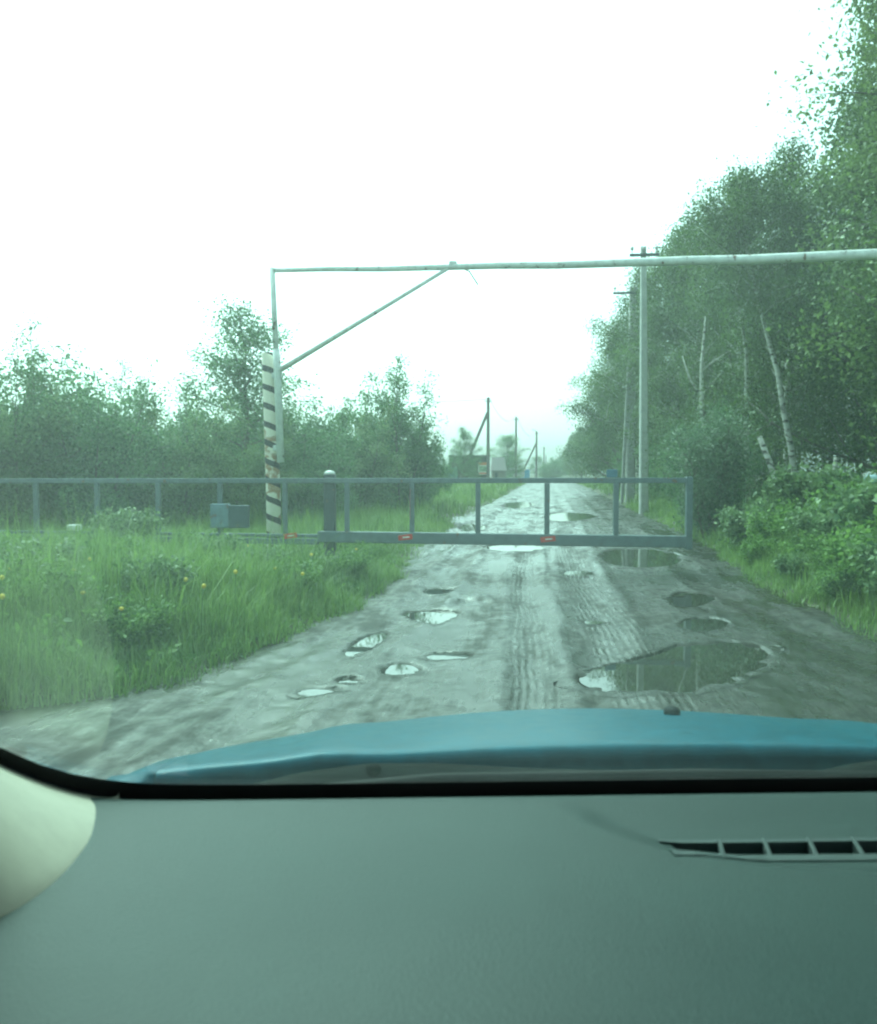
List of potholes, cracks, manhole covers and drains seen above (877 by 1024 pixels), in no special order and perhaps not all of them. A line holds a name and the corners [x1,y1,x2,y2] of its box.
pothole [329,674,370,684]
pothole [553,636,786,698]
pothole [417,650,480,661]
pothole [286,684,350,698]
pothole [674,615,735,632]
pothole [399,606,466,626]
pothole [591,547,690,569]
pothole [337,631,394,660]
pothole [540,511,605,522]
pothole [420,586,460,596]
pothole [667,590,717,608]
pothole [377,660,428,677]
